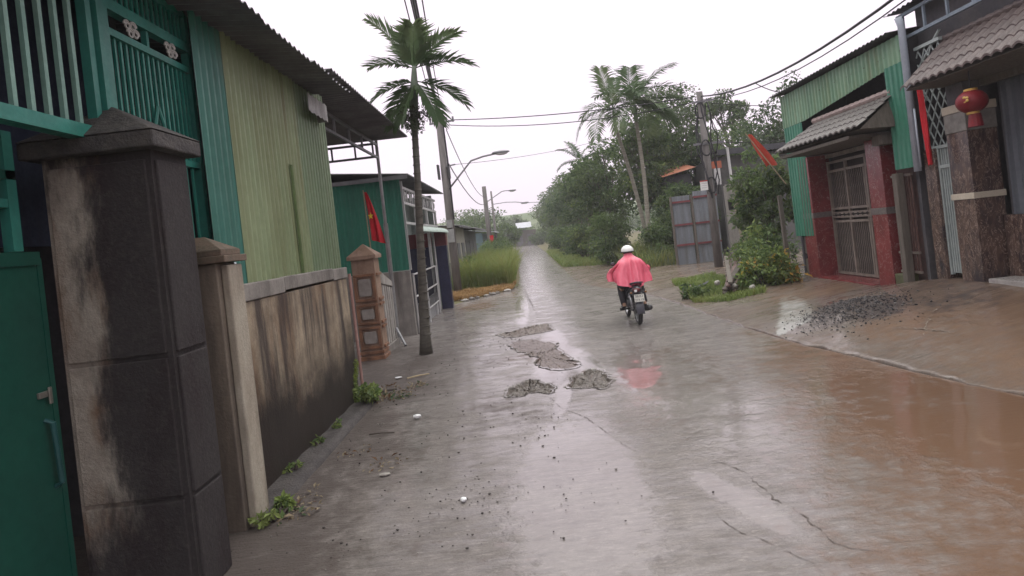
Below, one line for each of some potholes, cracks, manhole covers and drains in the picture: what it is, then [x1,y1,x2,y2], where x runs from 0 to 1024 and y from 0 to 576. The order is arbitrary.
pothole [508,338,581,370]
pothole [504,379,556,398]
crack [720,462,881,552]
pothole [565,368,615,390]
pothole [495,323,555,338]
